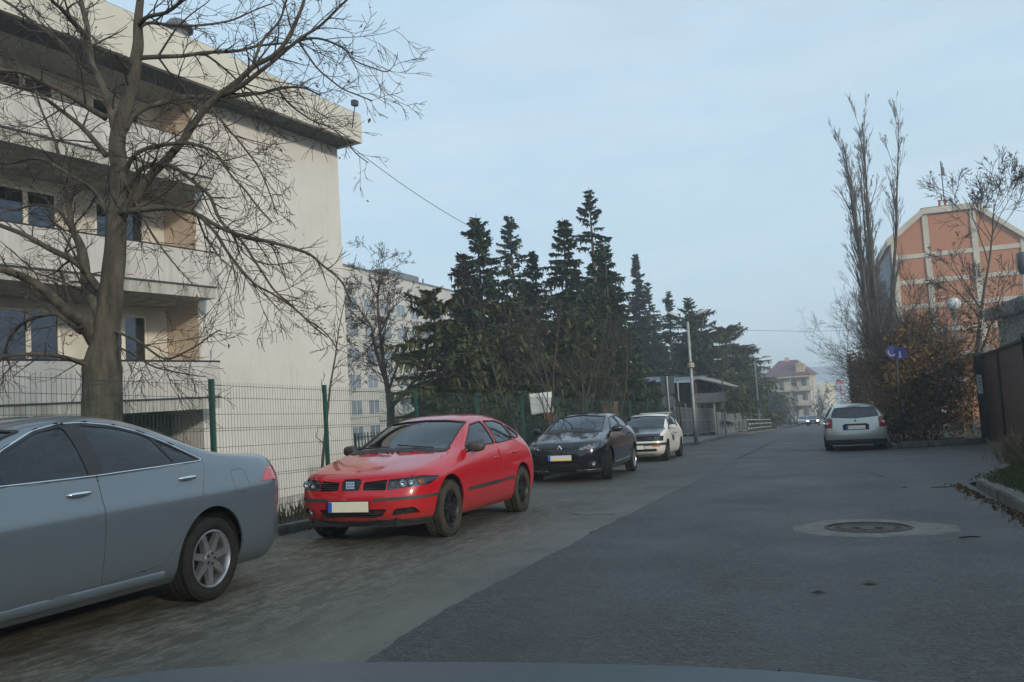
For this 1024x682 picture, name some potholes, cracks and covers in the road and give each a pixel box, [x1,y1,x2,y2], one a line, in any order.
manhole cover [792,519,961,537]
